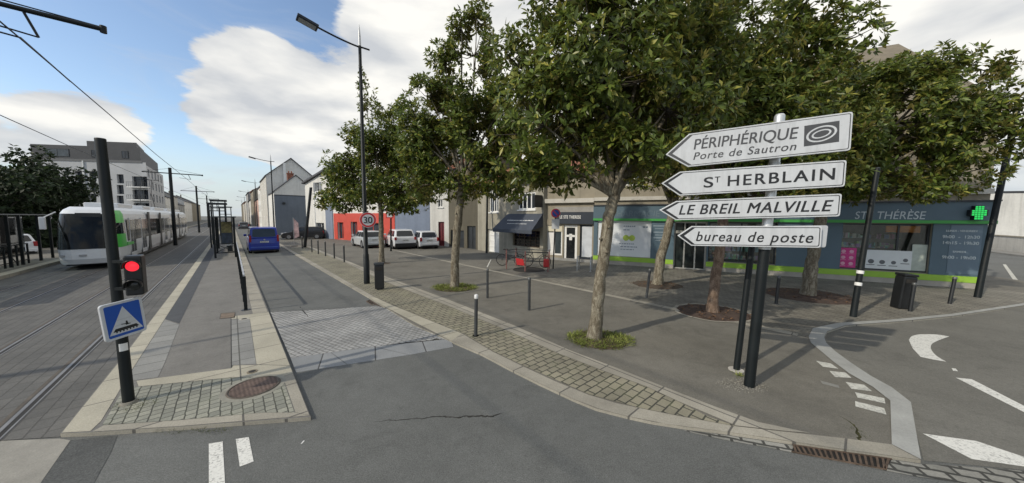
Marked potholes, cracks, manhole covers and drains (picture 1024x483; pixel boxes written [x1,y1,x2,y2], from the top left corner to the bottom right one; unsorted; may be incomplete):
crack [374,413,502,422]
manhole cover [219,374,286,402]
crack [838,415,862,440]
drain grate [791,444,892,470]
